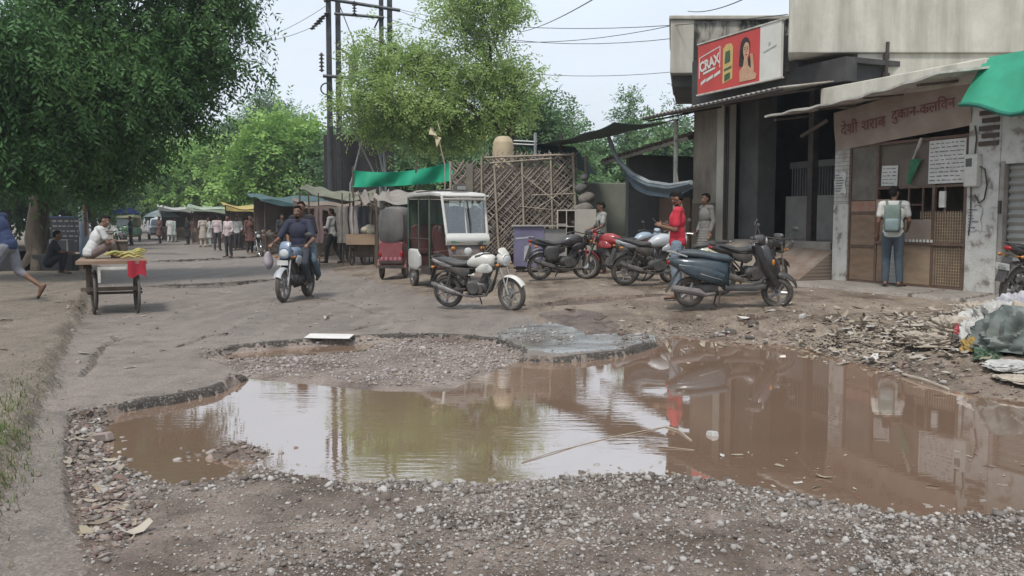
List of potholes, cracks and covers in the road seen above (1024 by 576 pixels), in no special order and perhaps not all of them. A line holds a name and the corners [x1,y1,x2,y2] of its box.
pothole [60,335,1024,576]
crack [79,334,122,377]
